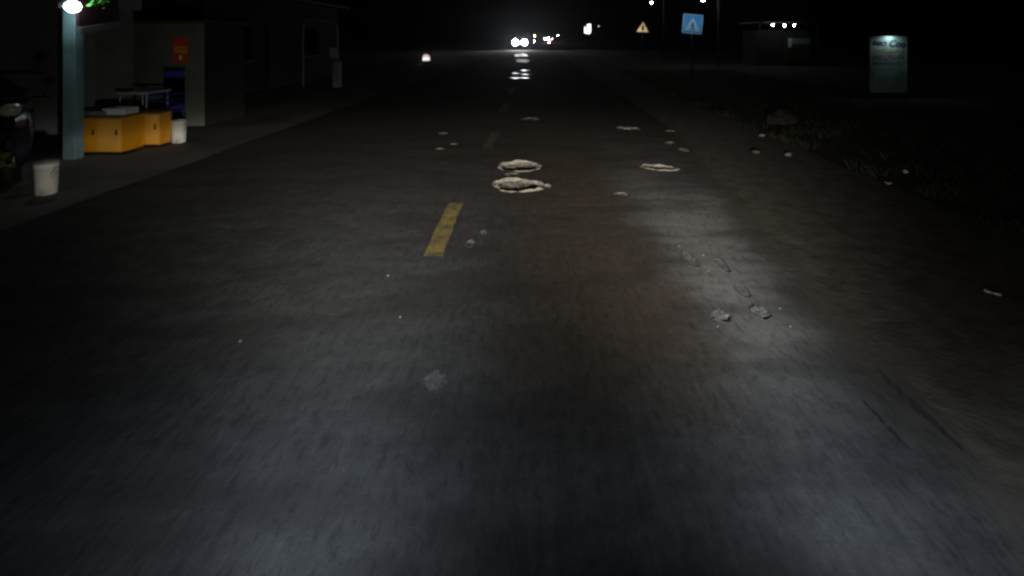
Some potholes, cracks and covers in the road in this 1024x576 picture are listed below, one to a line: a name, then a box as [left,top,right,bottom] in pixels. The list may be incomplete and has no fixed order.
crack [861,369,963,451]
pothole [498,160,542,172]
pothole [492,177,551,192]
pothole [749,305,773,321]
pothole [709,308,733,322]
